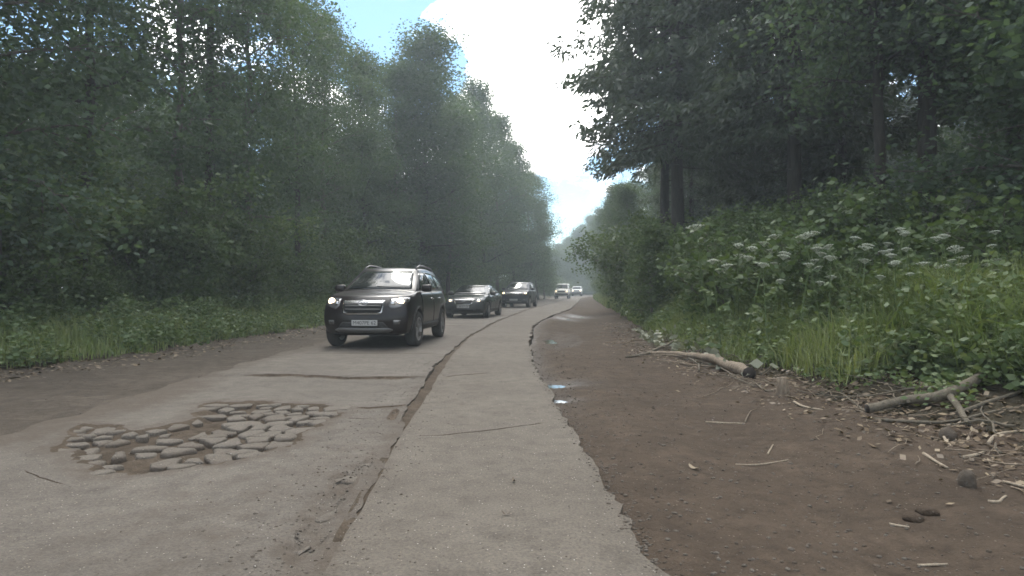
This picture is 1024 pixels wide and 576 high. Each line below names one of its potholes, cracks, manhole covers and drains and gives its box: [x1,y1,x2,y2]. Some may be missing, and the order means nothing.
crack [25,470,63,484]
crack [425,422,546,436]
crack [350,404,405,421]
pothole [50,401,351,475]
